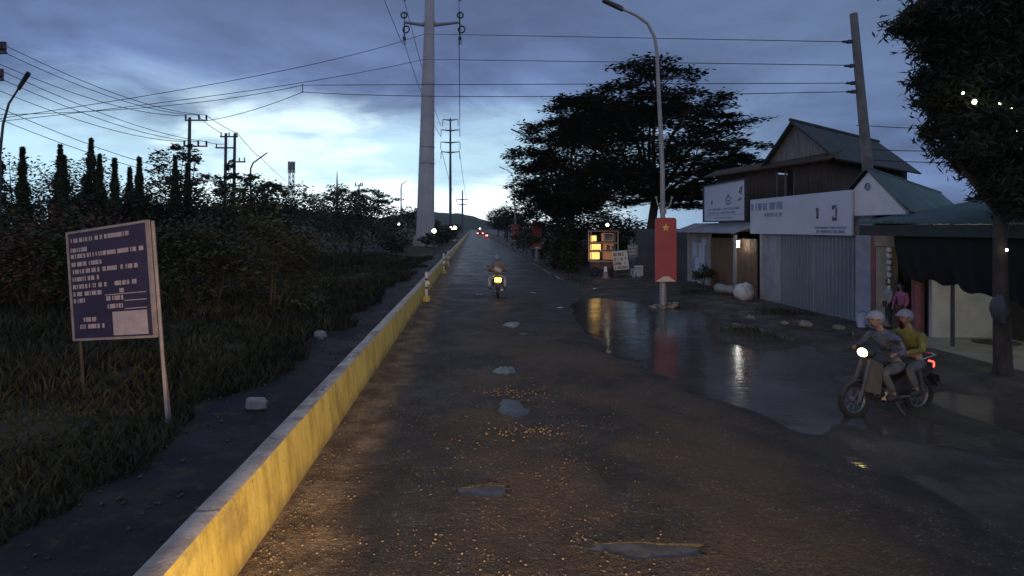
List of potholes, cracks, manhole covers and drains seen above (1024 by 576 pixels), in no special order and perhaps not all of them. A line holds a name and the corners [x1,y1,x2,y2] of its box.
pothole [493,397,535,419]
pothole [452,482,511,500]
pothole [490,364,520,375]
pothole [576,538,722,562]
